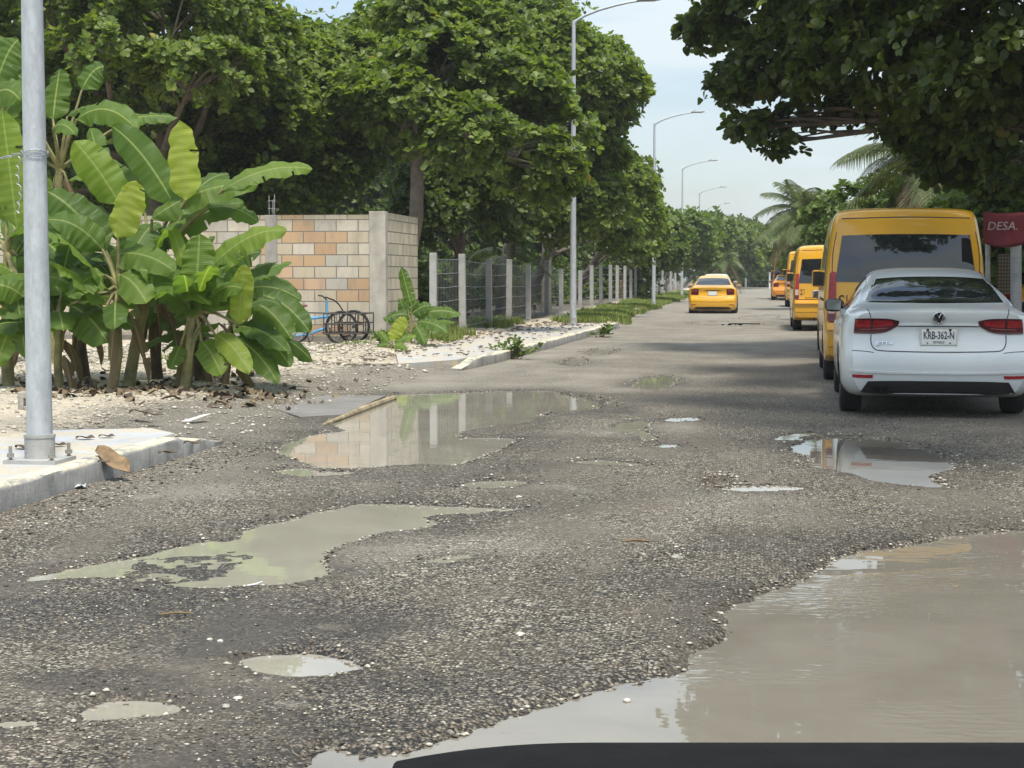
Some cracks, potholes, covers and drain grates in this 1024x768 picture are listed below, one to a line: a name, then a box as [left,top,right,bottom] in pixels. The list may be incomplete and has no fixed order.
pothole [265,389,607,468]
pothole [783,433,965,488]
pothole [715,483,814,492]
pothole [771,431,822,441]
pothole [628,375,687,389]
pothole [58,691,199,720]
pothole [15,499,537,589]
pothole [0,716,51,728]
pothole [222,523,1024,768]
